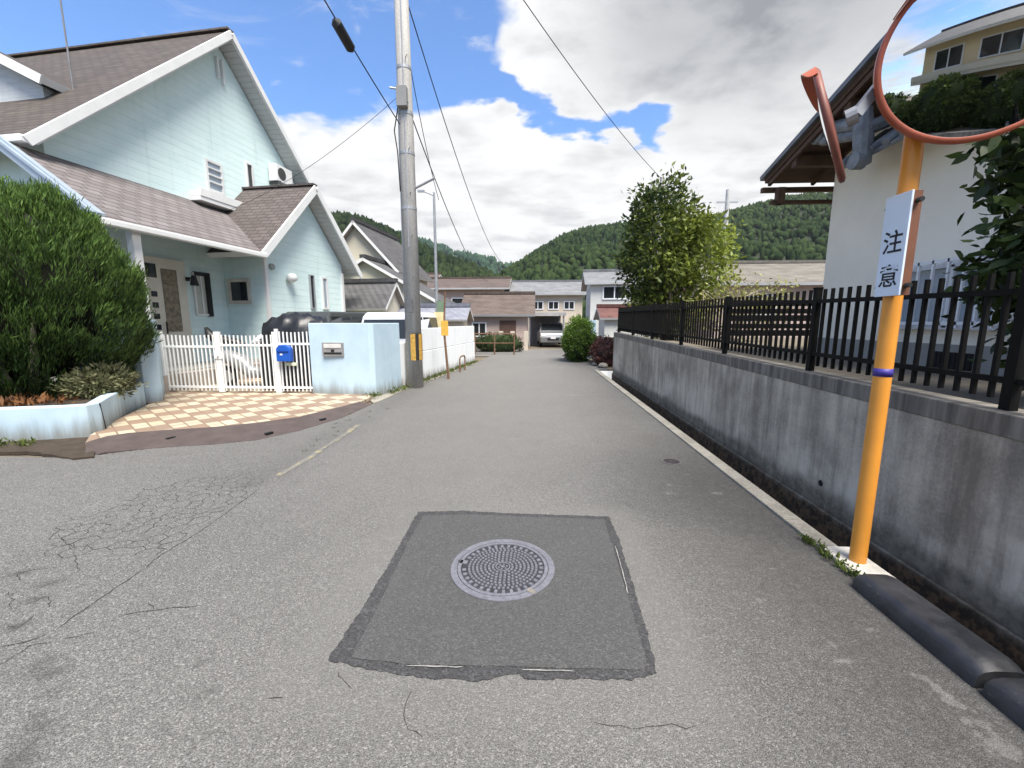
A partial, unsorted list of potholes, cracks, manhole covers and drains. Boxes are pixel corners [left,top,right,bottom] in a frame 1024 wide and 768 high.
crack [596,721,706,729]
manhole cover [451,539,555,602]
crack [1,475,258,664]
